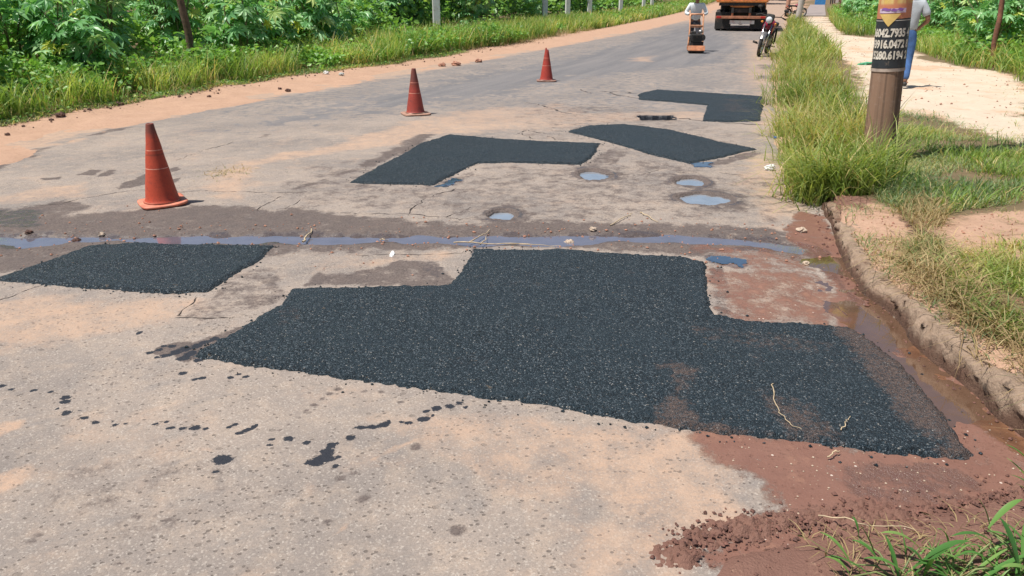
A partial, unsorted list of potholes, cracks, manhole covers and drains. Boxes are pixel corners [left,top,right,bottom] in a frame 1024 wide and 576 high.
pothole [665,174,715,188]
crack [0,188,480,221]
pothole [481,207,522,222]
pothole [570,167,618,182]
pothole [667,190,744,208]
crack [517,130,555,139]
